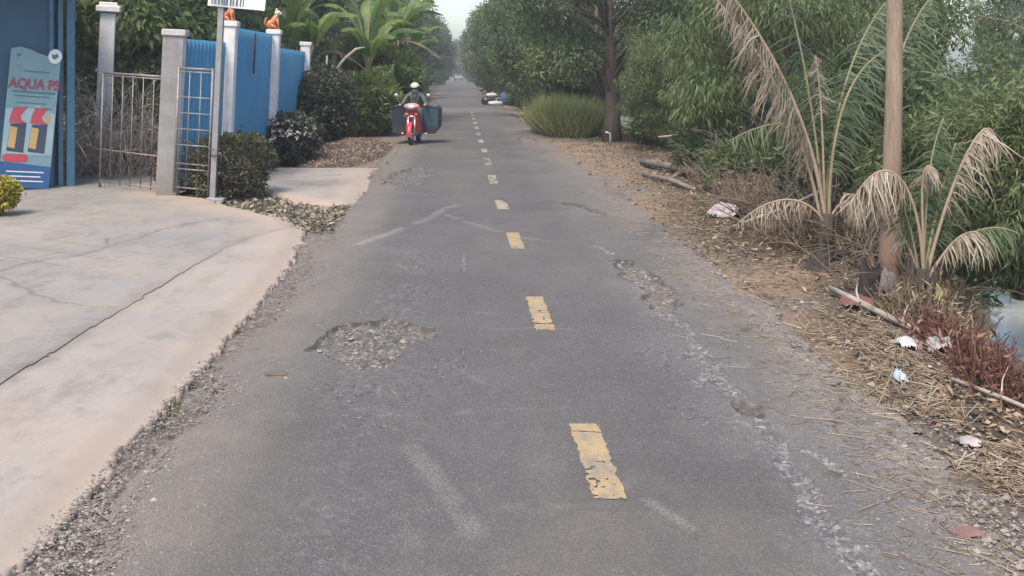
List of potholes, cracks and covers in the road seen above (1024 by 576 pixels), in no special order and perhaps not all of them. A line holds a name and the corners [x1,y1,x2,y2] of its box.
pothole [379,167,436,186]
pothole [728,400,770,419]
pothole [303,318,441,370]
pothole [612,259,685,314]
